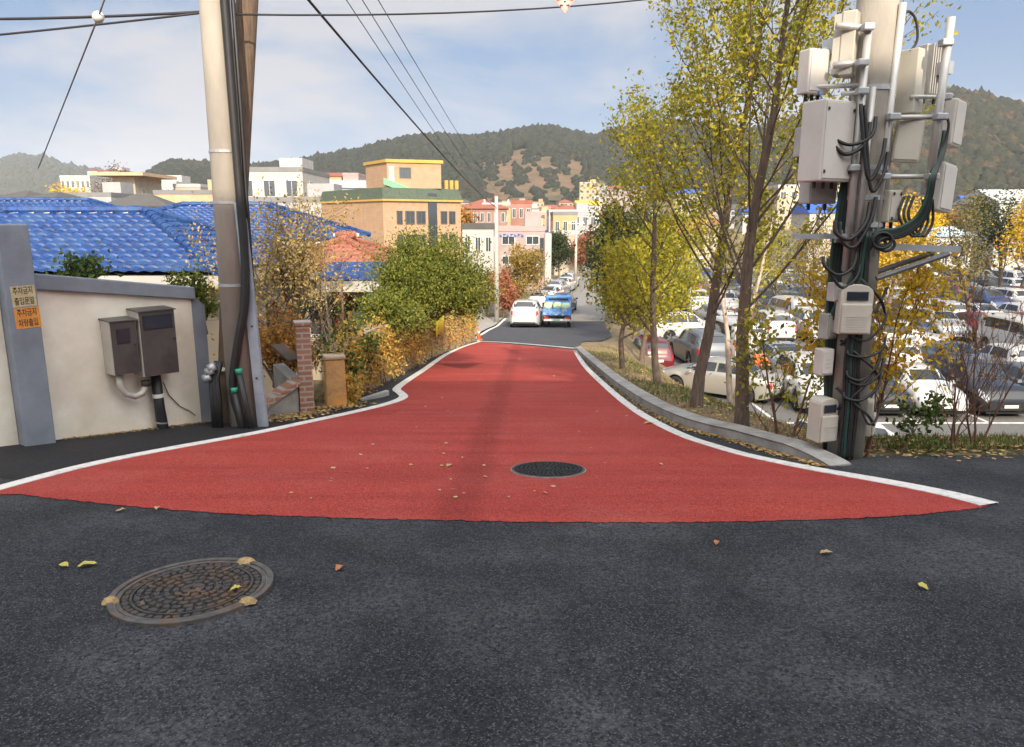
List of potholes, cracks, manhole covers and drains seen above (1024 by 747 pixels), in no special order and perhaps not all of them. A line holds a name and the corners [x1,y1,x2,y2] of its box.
manhole cover [101,557,274,627]
manhole cover [510,461,586,478]
